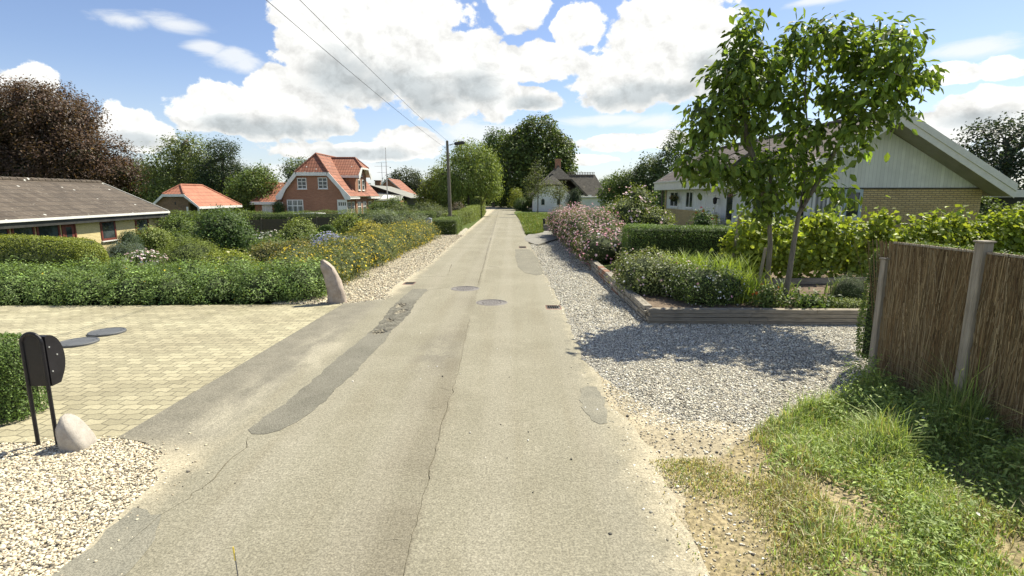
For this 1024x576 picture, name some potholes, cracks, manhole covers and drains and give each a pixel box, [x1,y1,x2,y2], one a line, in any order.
crack [383,318,470,576]
crack [164,438,248,513]
